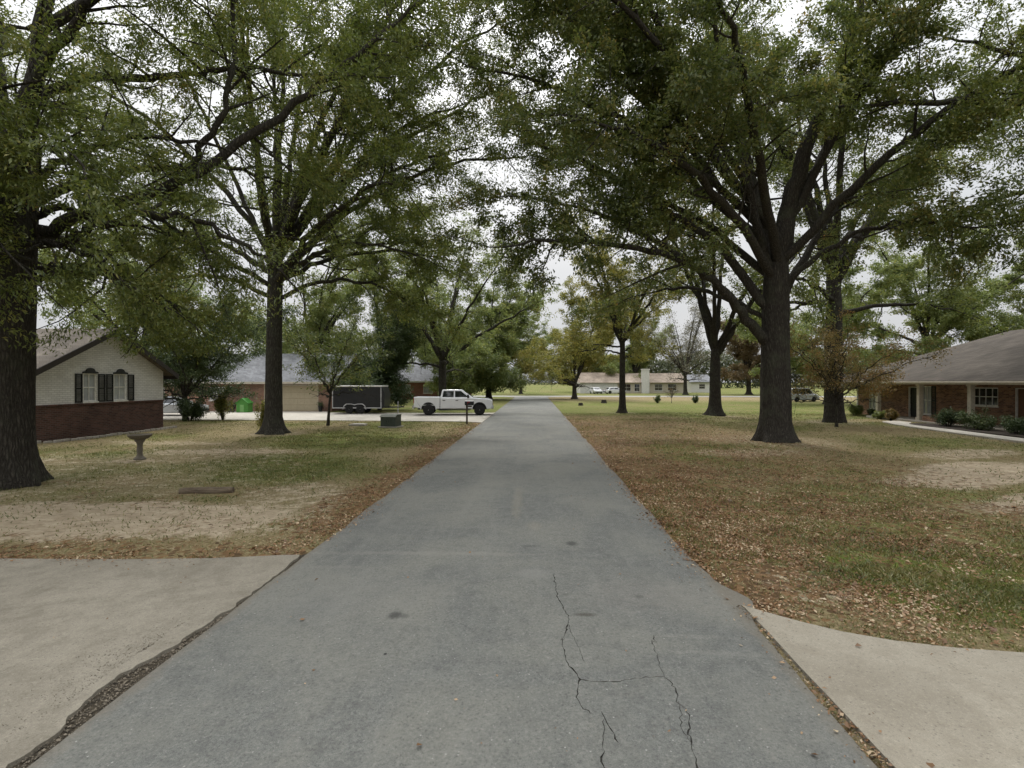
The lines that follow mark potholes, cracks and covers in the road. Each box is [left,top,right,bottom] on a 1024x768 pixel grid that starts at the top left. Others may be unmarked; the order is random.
crack [553,575,698,768]
